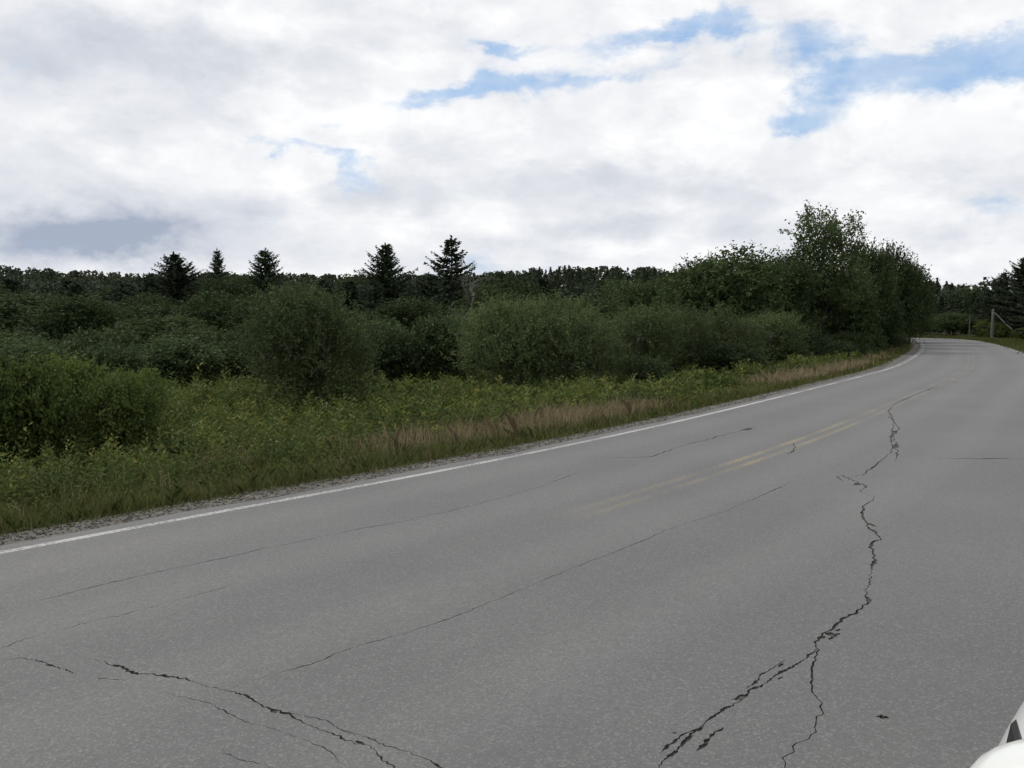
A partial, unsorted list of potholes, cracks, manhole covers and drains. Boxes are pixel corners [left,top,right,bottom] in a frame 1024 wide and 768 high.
crack [0,658,442,768]
crack [2,470,587,609]
crack [659,386,938,768]
crack [232,486,783,688]
